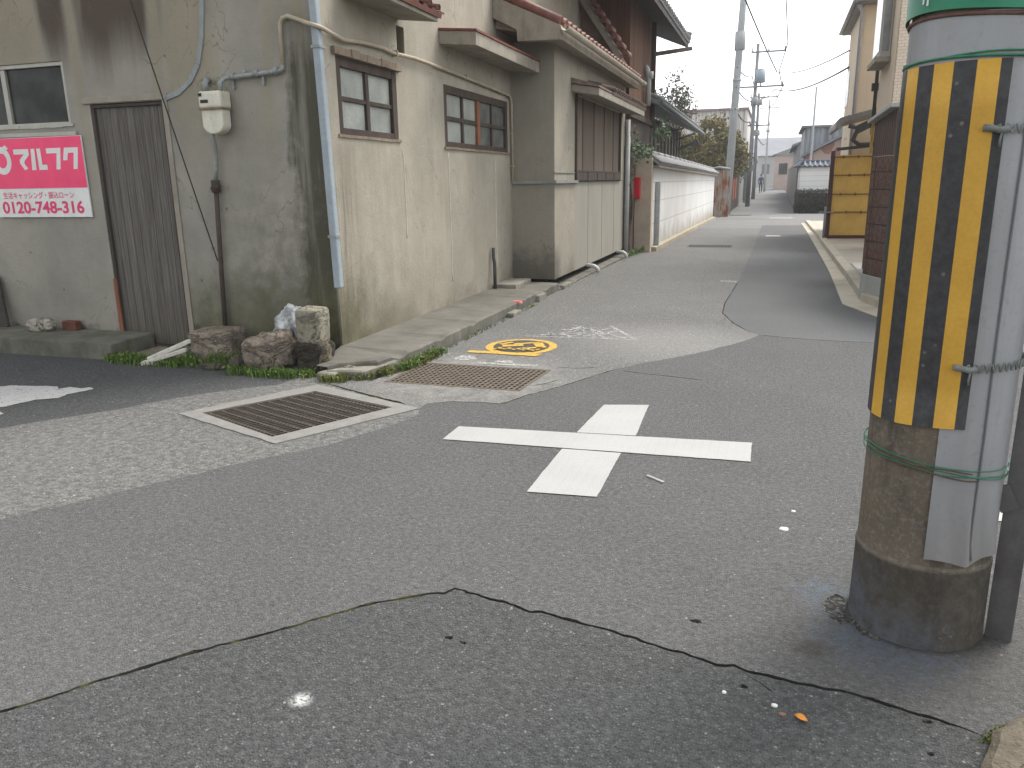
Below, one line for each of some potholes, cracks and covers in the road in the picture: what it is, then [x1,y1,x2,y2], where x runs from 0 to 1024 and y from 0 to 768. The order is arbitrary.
drain grate [385,363,551,391]
drain grate [178,384,419,444]
crack [0,587,988,738]
pothole [822,594,881,641]
